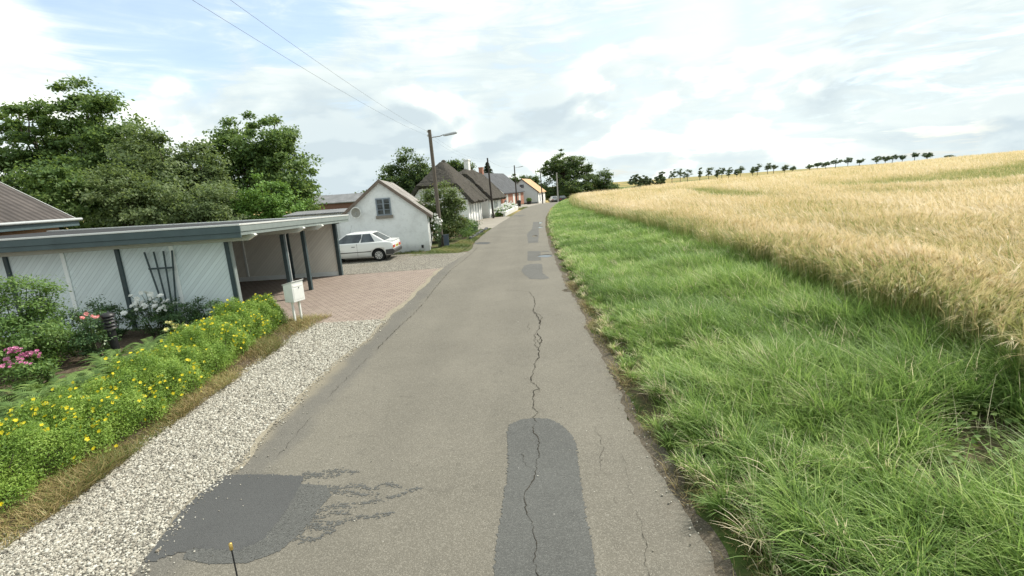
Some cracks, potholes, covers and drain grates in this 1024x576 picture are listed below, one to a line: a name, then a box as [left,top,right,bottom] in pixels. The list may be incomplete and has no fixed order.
crack [515,290,543,576]
